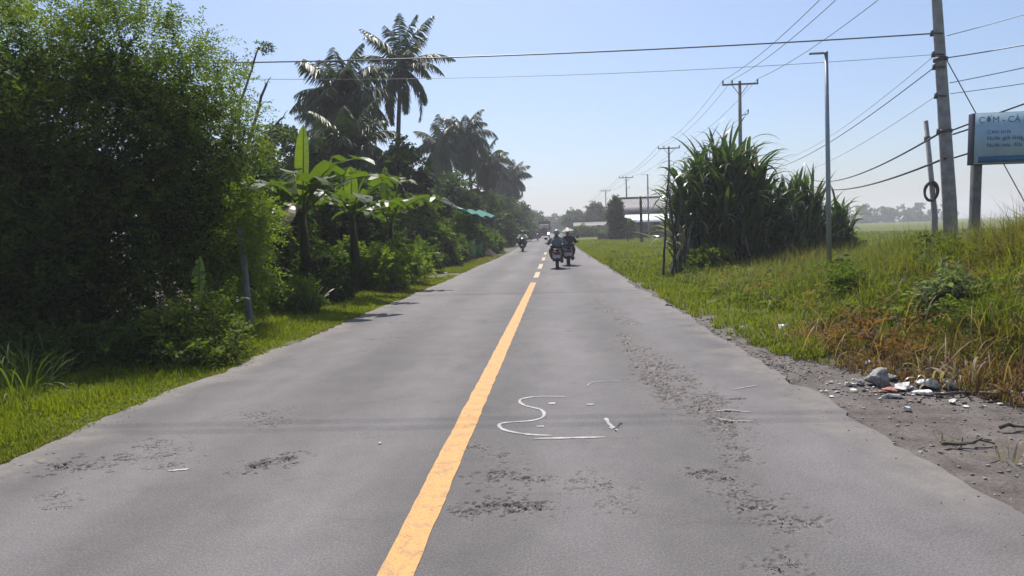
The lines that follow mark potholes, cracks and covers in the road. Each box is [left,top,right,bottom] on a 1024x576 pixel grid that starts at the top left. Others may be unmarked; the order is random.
pothole [0,447,171,485]
pothole [82,430,237,479]
